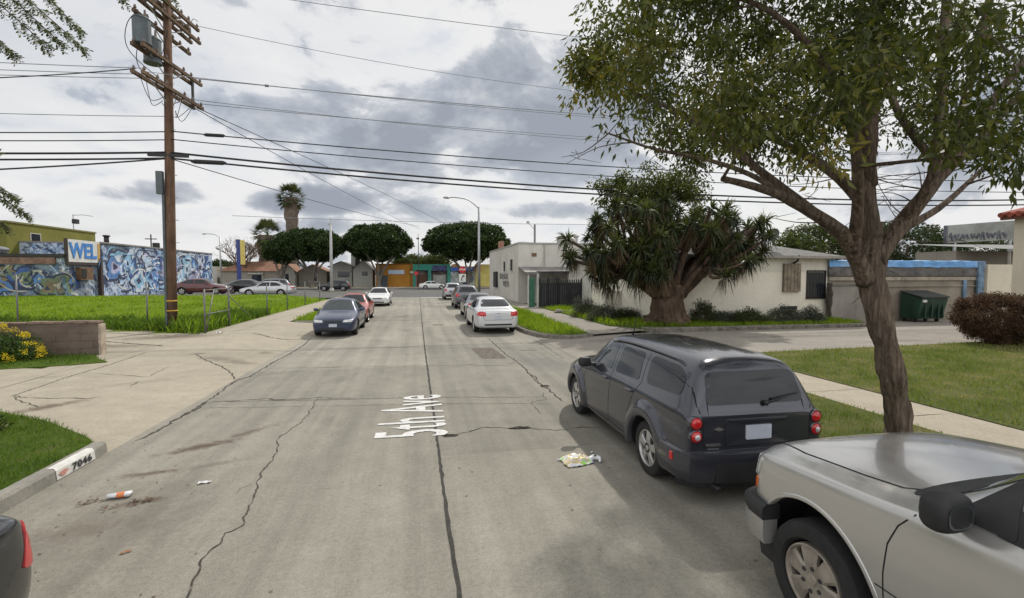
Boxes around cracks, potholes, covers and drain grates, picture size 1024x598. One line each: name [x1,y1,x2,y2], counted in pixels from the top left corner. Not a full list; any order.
crack [458,338,594,434]
crack [138,333,354,598]
